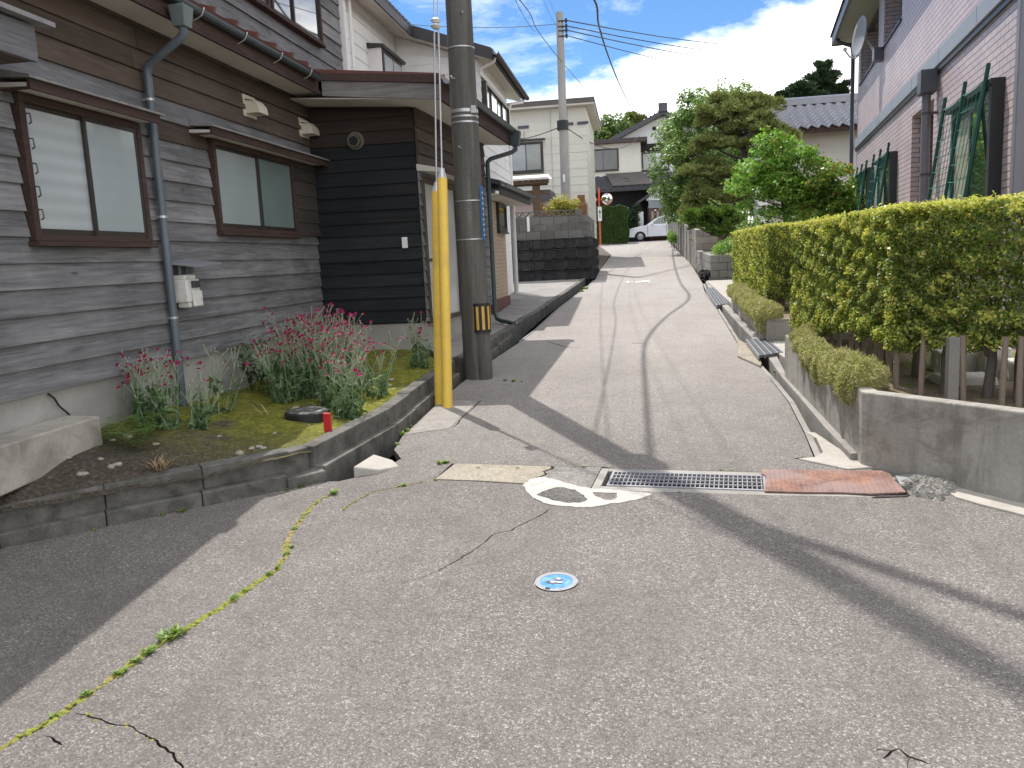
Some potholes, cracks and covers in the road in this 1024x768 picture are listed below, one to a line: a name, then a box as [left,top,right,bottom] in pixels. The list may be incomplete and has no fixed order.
drain grate [606,471,766,492]
manhole cover [534,572,579,591]
crack [876,748,929,768]
crack [406,510,548,582]
crack [0,481,425,768]
